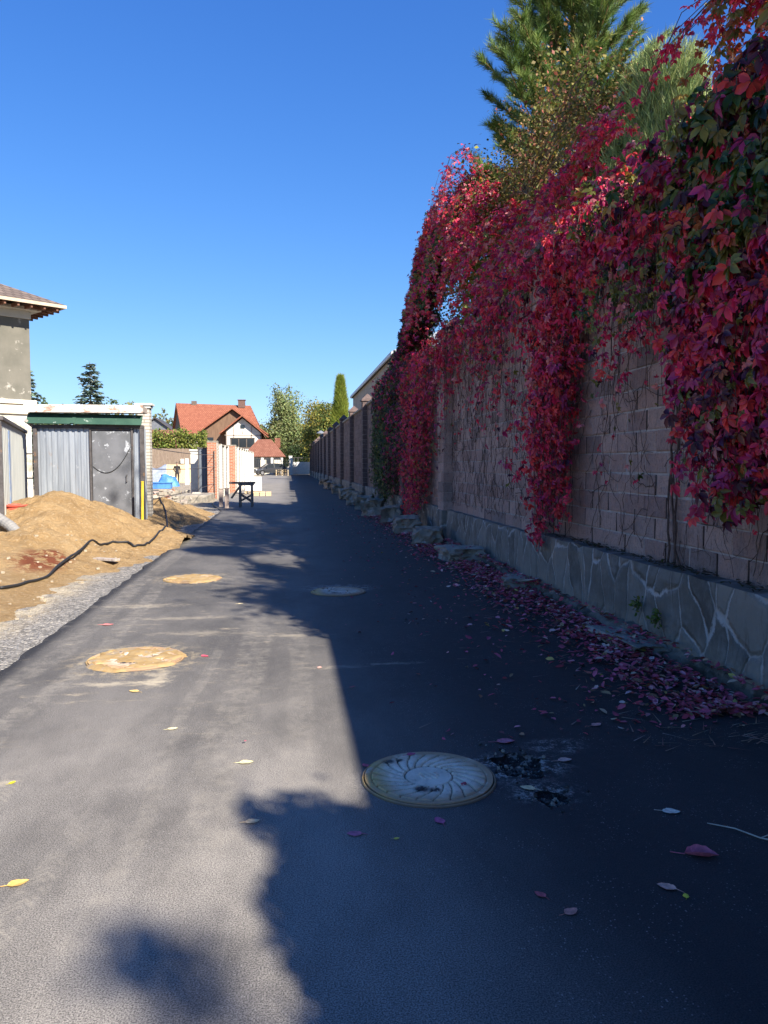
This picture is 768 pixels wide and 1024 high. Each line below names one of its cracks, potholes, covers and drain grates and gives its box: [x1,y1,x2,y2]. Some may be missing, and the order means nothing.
manhole cover [85,646,188,673]
manhole cover [311,587,366,597]
manhole cover [163,574,222,584]
manhole cover [361,752,497,809]
pothole [478,742,566,785]
pothole [518,784,590,812]
